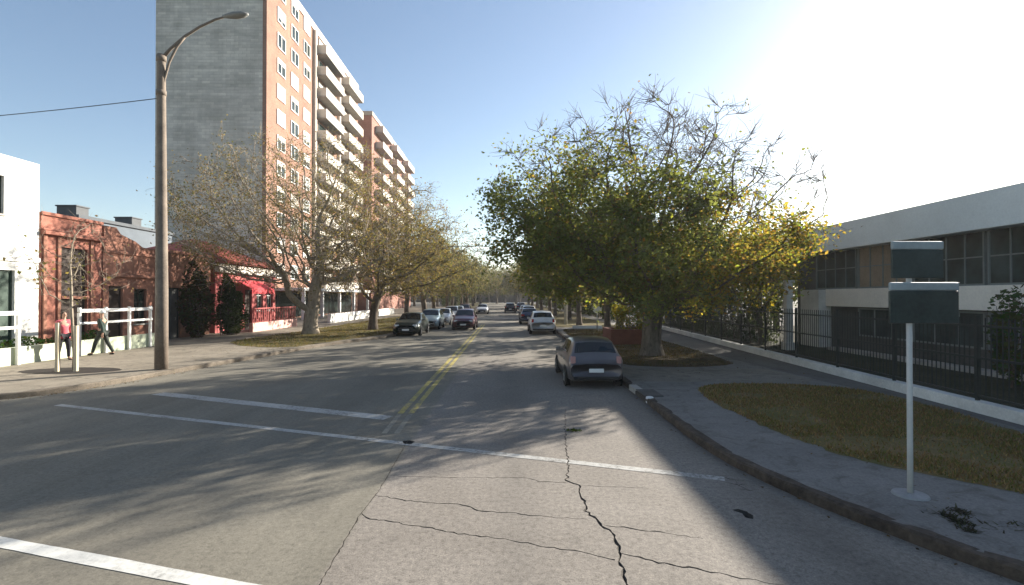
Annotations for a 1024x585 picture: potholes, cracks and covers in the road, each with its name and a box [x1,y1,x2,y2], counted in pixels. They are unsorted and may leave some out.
crack [362,413,782,585]
